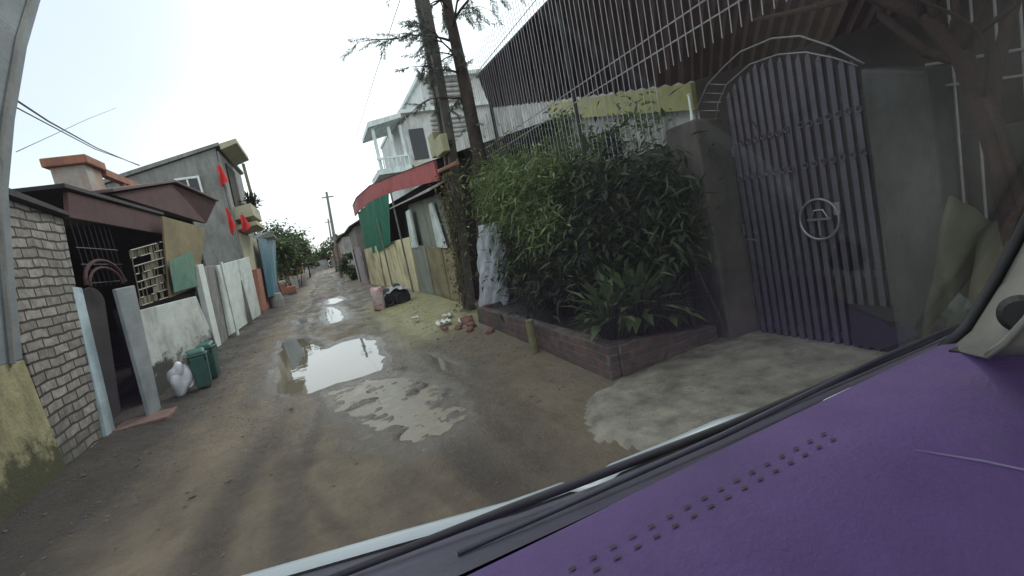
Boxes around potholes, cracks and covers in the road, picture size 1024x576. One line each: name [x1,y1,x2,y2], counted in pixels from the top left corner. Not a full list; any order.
pothole [263,334,396,401]
